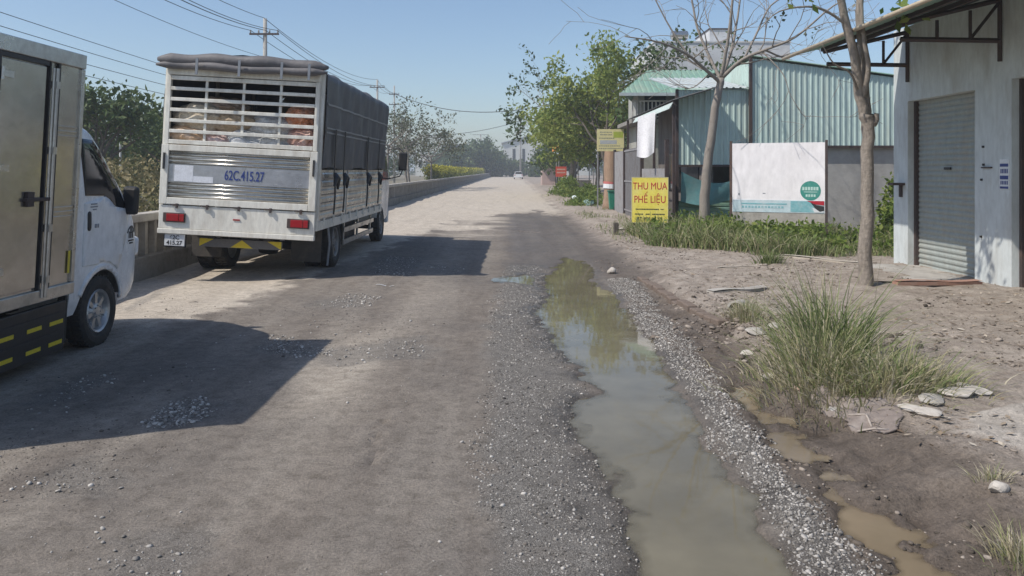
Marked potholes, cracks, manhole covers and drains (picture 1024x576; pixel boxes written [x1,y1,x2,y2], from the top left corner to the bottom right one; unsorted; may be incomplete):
pothole [529,257,809,576]
